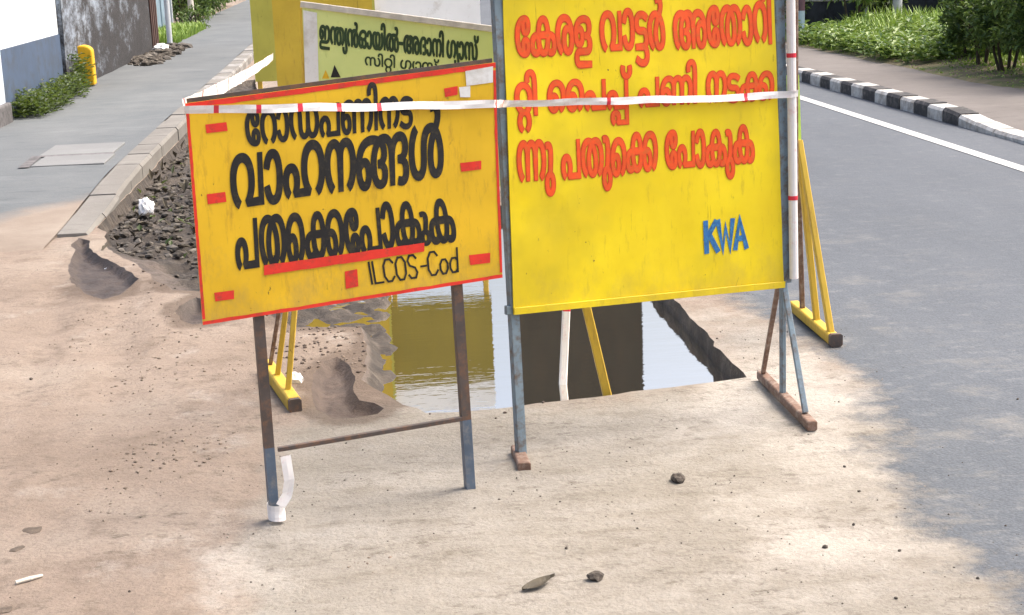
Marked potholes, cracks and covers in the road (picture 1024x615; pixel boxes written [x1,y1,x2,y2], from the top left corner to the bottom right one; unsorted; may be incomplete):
pothole [312,357,384,419]
pothole [68,238,139,299]
manhole cover [40,142,125,156]
manhole cover [30,153,115,167]
